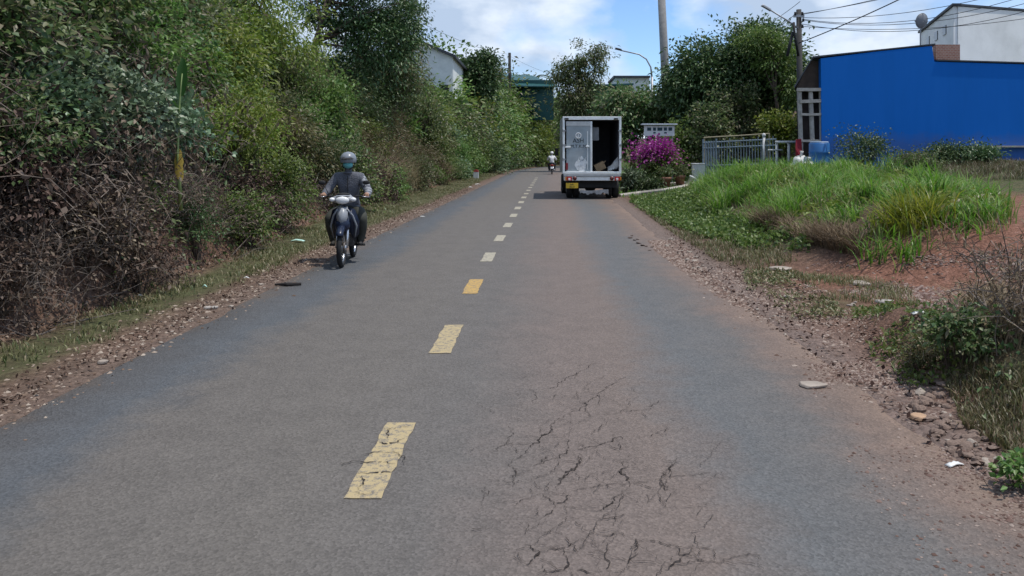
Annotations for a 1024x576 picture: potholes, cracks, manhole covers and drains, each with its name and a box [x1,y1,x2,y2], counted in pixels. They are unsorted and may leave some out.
crack [450,361,761,576]
